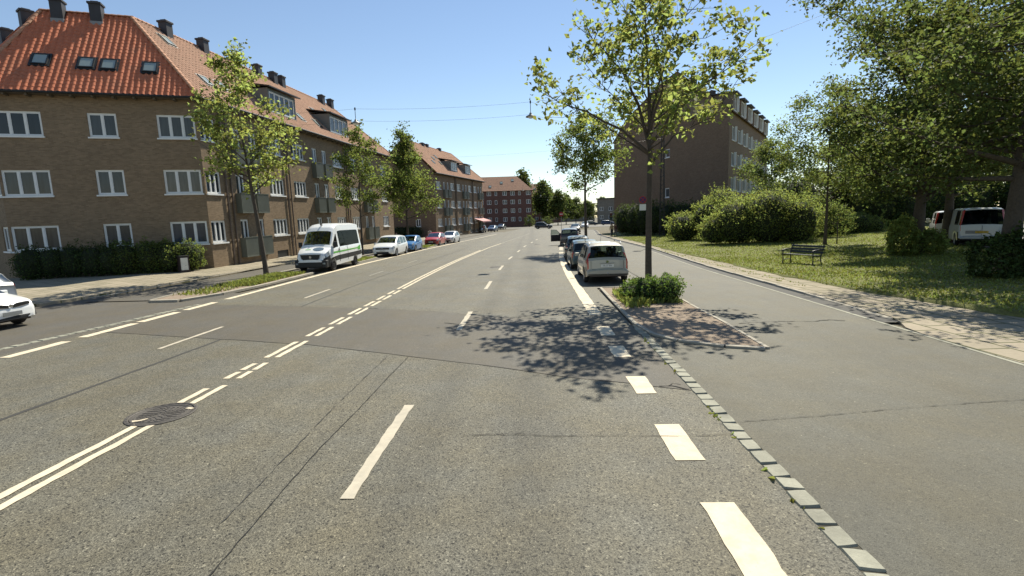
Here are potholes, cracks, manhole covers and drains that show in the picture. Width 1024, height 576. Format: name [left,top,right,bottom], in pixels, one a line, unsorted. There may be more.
manhole cover [123,402,198,427]
